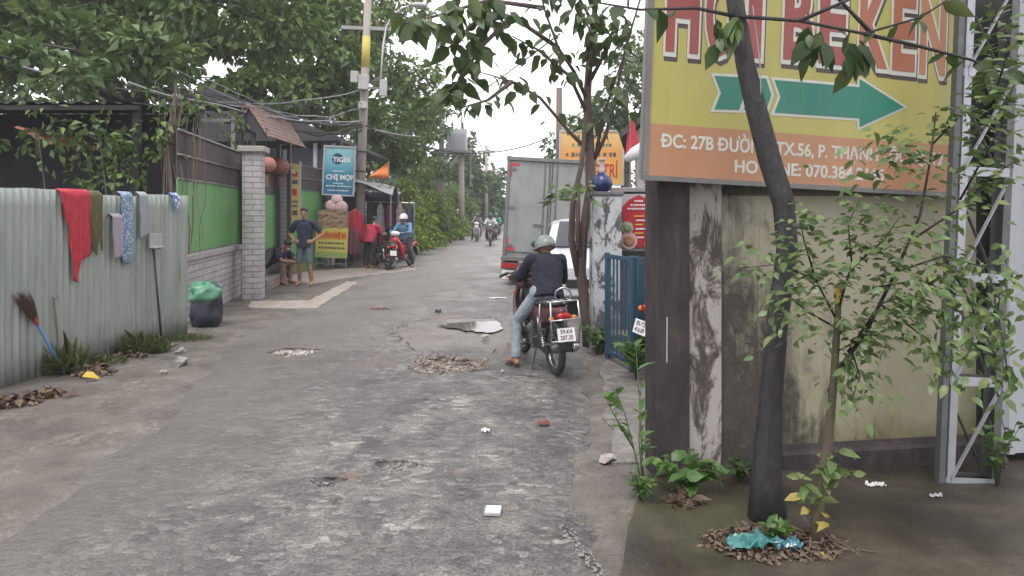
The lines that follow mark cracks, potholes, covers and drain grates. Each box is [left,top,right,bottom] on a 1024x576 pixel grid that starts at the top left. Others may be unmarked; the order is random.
pothole [408,353,490,375]
crack [559,524,609,576]
pothole [259,346,331,358]
pothole [298,472,363,492]
pothole [358,457,439,477]
